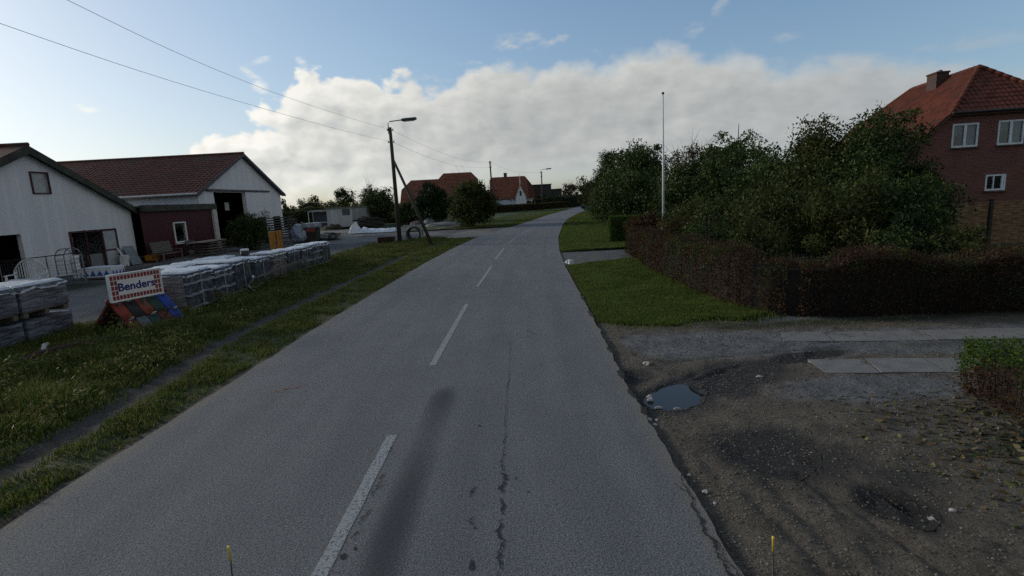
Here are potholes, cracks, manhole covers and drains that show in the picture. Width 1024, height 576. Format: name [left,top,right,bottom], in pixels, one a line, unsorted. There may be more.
crack [351,474,387,538]
crack [469,366,510,576]
crack [676,471,740,576]
pothole [852,486,941,531]
pothole [641,383,707,412]
